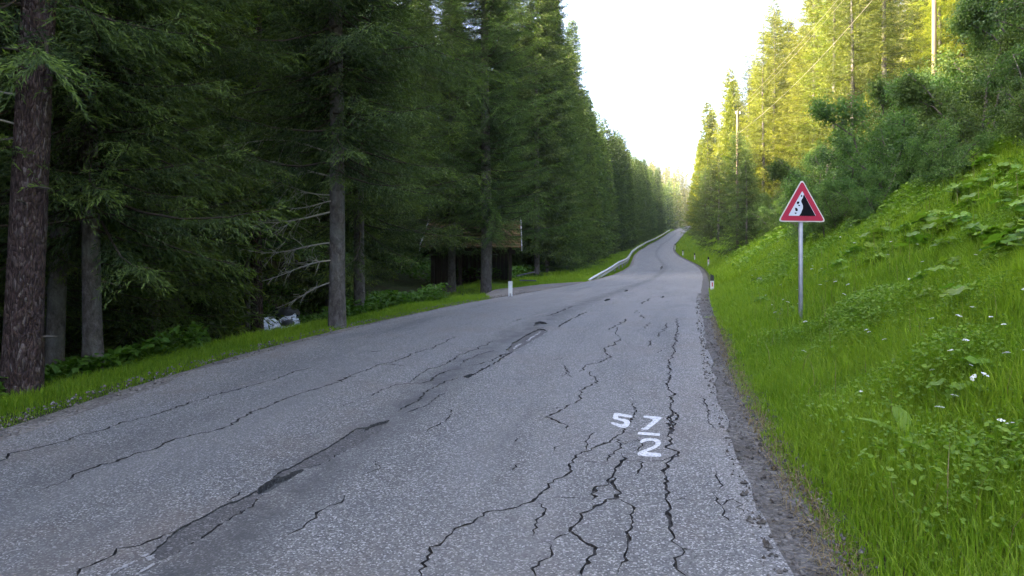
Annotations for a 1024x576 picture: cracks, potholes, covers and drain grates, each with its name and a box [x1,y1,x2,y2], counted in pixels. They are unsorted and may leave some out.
crack [418,299,745,576]
crack [39,339,512,491]
pothole [506,329,547,352]
crack [76,492,263,576]
crack [284,495,345,538]
